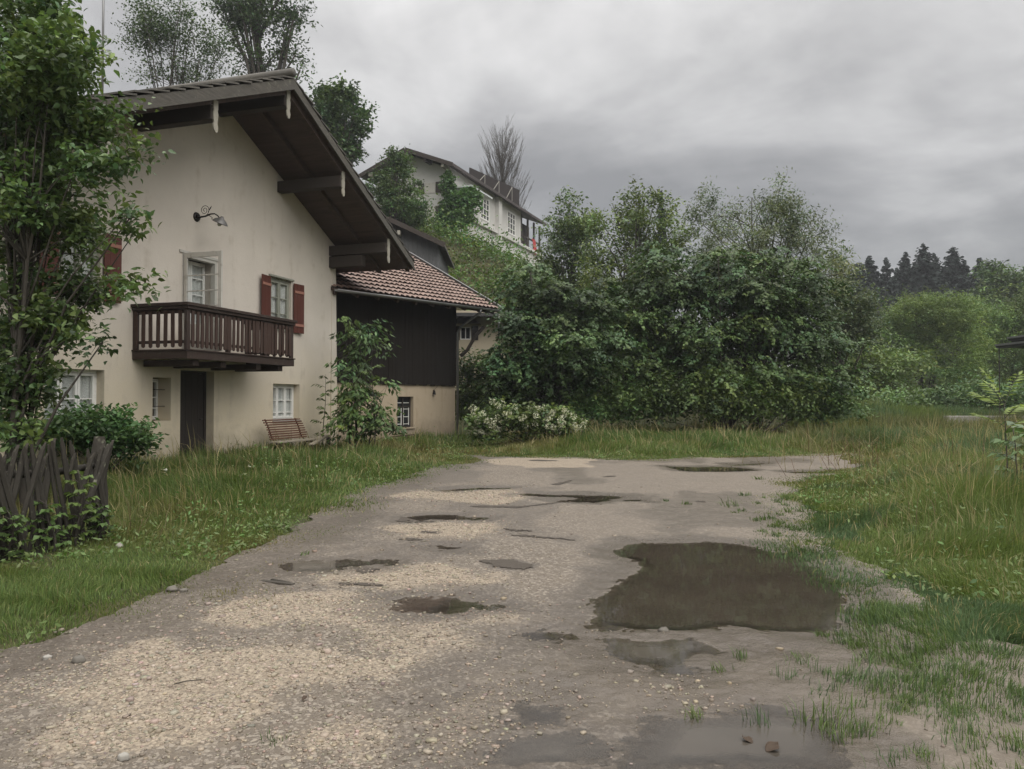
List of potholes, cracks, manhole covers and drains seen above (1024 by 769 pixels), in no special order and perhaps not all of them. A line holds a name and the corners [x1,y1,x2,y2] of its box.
pothole [599,544,839,631]
pothole [404,600,468,611]
pothole [612,642,707,671]
pothole [635,717,831,766]
pothole [527,493,615,502]
